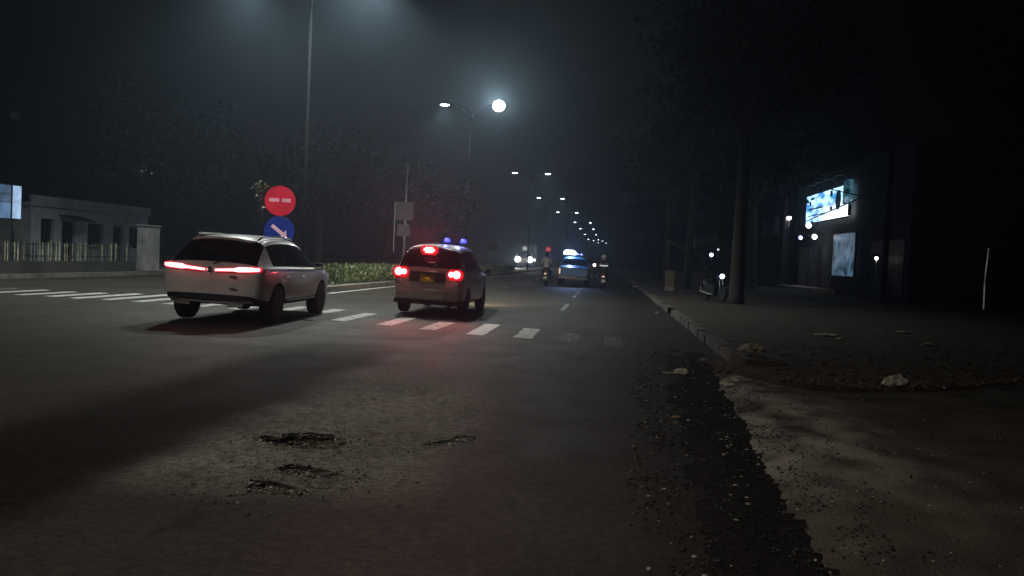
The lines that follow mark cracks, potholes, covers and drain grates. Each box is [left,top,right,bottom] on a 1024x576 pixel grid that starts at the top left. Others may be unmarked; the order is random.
pothole [274,464,340,478]
pothole [244,480,307,496]
pothole [253,432,346,449]
